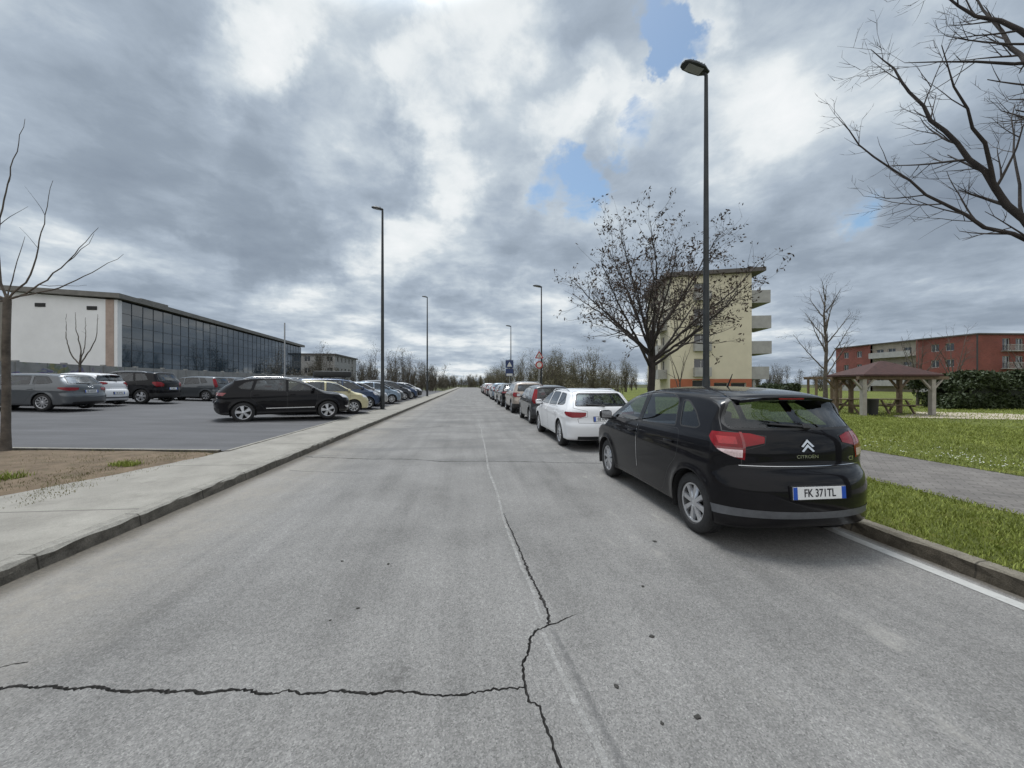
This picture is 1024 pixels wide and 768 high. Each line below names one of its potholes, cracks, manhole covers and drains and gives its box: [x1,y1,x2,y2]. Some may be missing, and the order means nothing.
crack [0,515,579,768]
crack [290,457,559,473]
